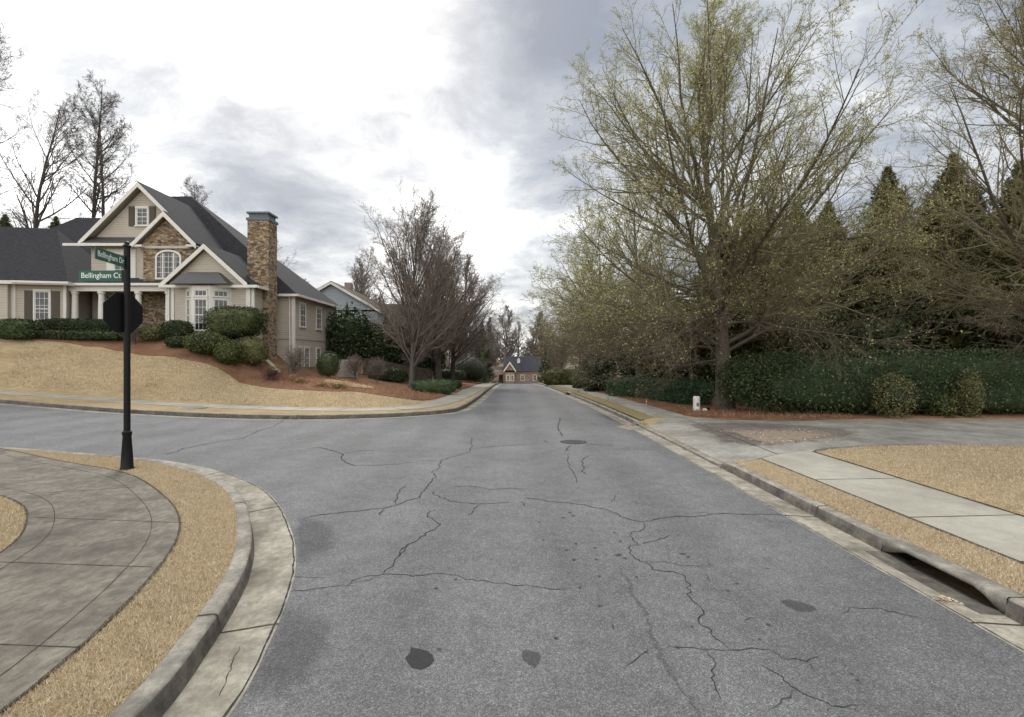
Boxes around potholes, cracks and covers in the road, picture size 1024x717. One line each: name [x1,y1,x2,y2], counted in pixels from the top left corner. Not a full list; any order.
crack [218,412,1024,717]
drain grate [844,537,1024,616]
